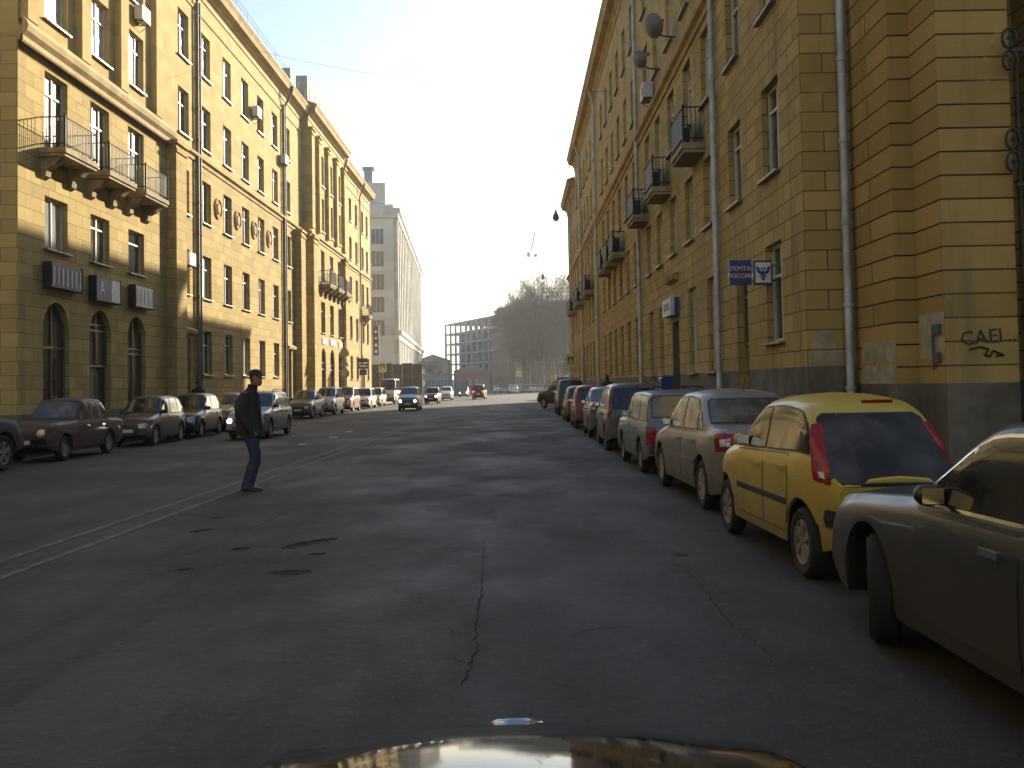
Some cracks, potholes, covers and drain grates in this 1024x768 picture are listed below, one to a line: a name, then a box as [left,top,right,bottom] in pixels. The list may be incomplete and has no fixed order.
crack [442,544,486,685]
crack [688,571,776,664]
pothole [282,538,338,549]
